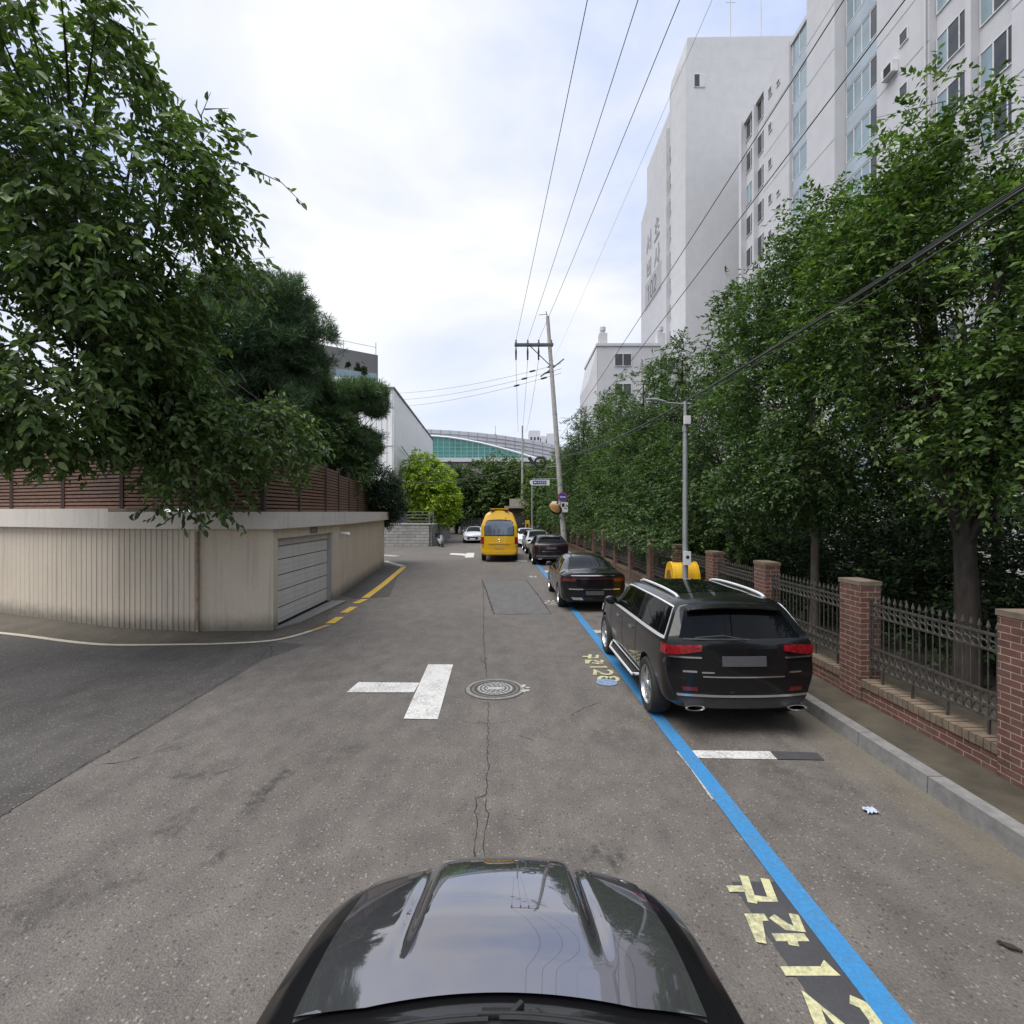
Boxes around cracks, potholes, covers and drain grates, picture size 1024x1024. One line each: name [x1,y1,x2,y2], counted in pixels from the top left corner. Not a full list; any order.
crack [466,703,501,857]
manhole cover [465,679,531,700]
